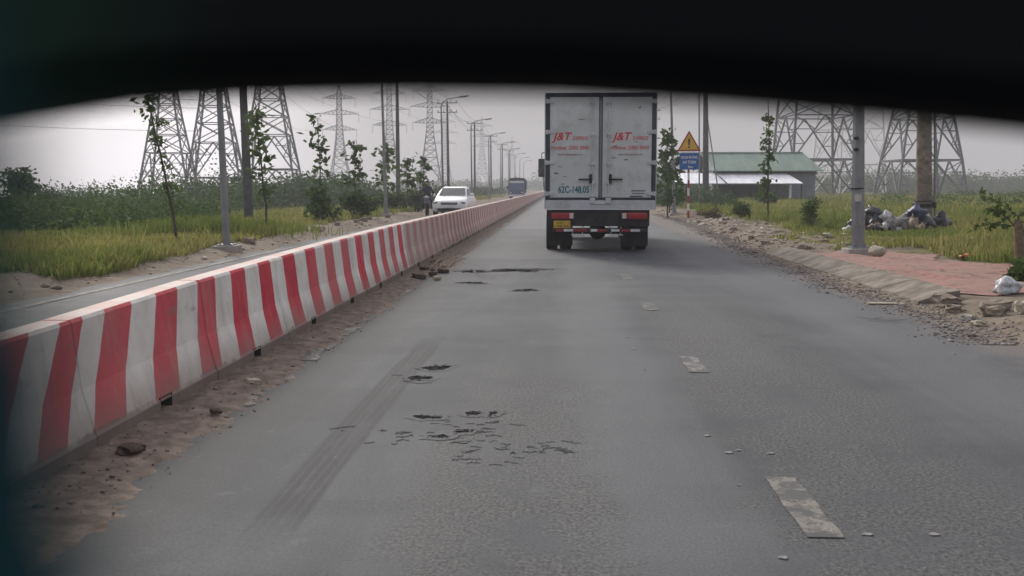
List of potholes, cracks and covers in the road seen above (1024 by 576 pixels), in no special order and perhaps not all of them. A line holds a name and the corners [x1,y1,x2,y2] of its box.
pothole [445,427,477,436]
pothole [418,432,458,440]
crack [330,421,580,465]
pothole [478,410,506,418]
pothole [414,364,457,372]
pothole [457,409,490,417]
